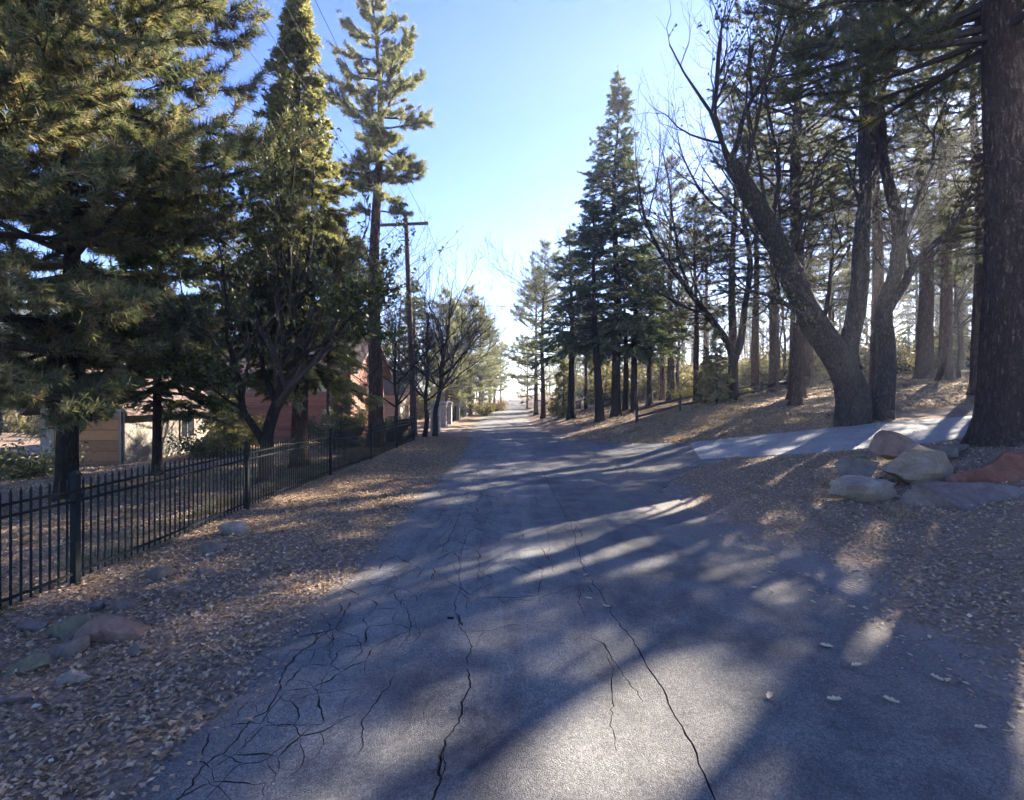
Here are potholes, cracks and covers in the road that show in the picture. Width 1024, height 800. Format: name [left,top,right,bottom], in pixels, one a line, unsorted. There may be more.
crack [166,541,423,800]
crack [594,639,643,750]
